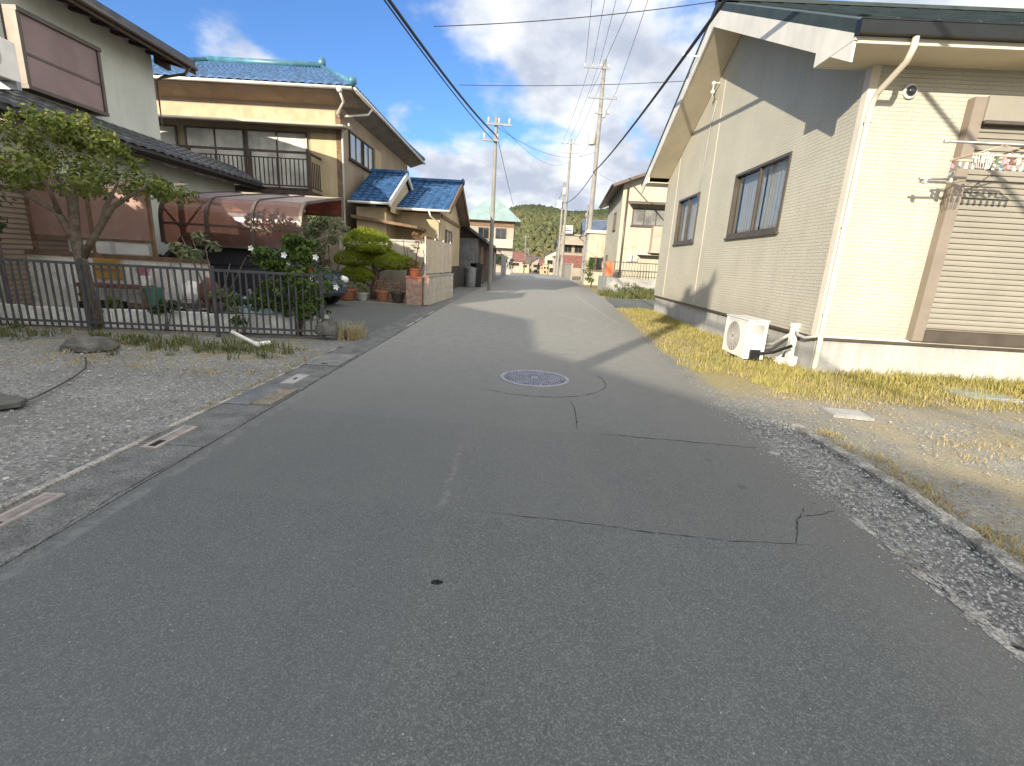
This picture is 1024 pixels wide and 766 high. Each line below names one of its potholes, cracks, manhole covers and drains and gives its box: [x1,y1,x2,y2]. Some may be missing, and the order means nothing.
crack [476,507,846,547]
crack [478,377,756,448]
manhole cover [500,370,569,387]
